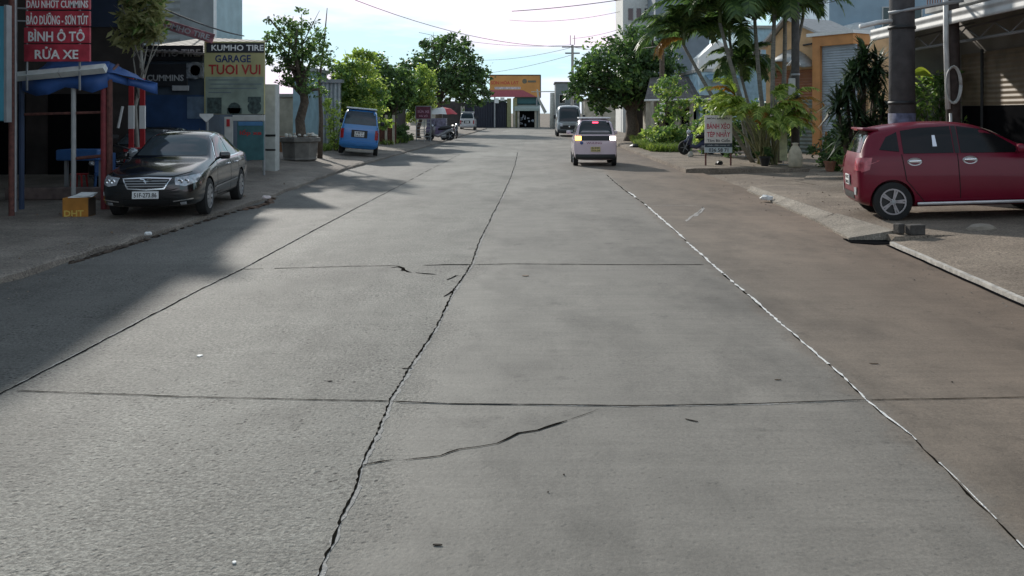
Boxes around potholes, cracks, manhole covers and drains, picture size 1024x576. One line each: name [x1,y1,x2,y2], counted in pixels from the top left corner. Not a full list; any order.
crack [316,152,598,576]
